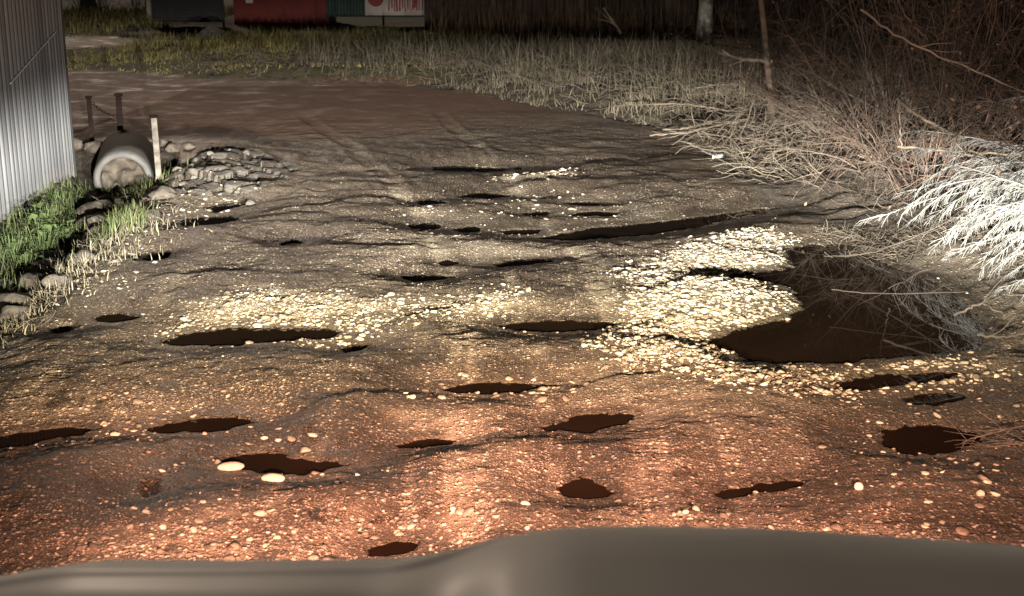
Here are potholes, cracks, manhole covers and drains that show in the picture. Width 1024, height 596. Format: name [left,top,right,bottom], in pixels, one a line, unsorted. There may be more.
pothole [365,536,423,557]
pothole [824,368,971,391]
pothole [875,420,988,456]
pothole [142,412,263,434]
pothole [395,434,460,449]
pothole [0,423,105,449]
pothole [436,378,563,395]
pothole [534,206,782,241]
pothole [539,410,642,434]
pothole [160,324,343,348]
pothole [213,447,355,476]
pothole [555,473,621,499]
